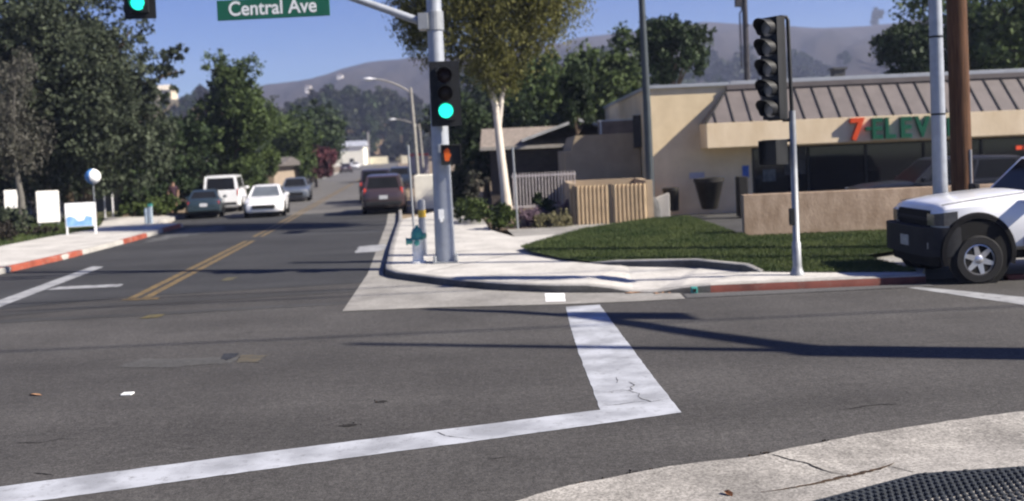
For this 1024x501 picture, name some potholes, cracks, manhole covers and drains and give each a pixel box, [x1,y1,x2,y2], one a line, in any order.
crack [607,377,668,405]
crack [763,454,913,492]
